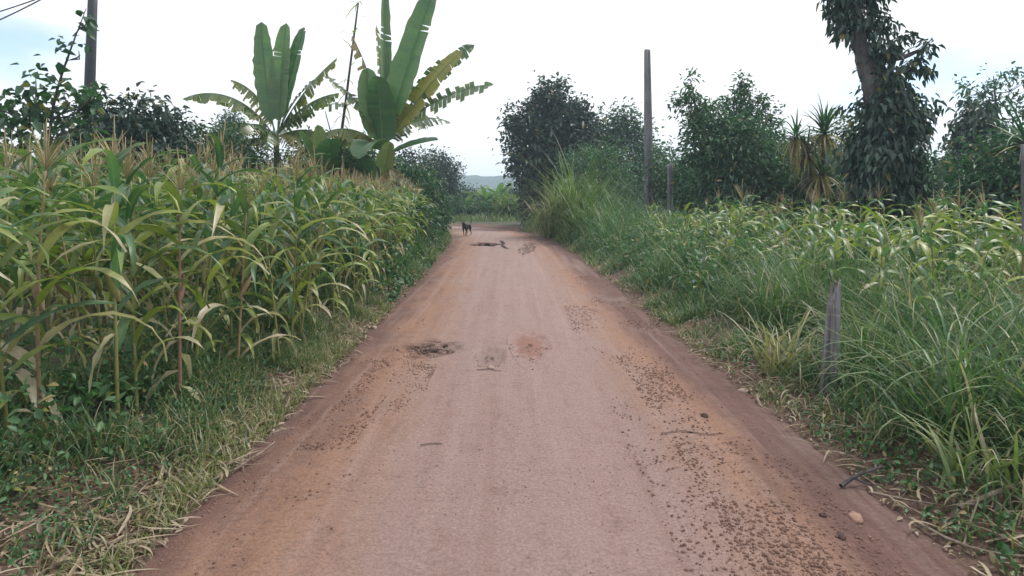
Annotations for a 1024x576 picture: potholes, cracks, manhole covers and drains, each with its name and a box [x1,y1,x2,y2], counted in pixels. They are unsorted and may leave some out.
pothole [518,243,537,255]
pothole [473,347,508,367]
pothole [393,338,466,359]
